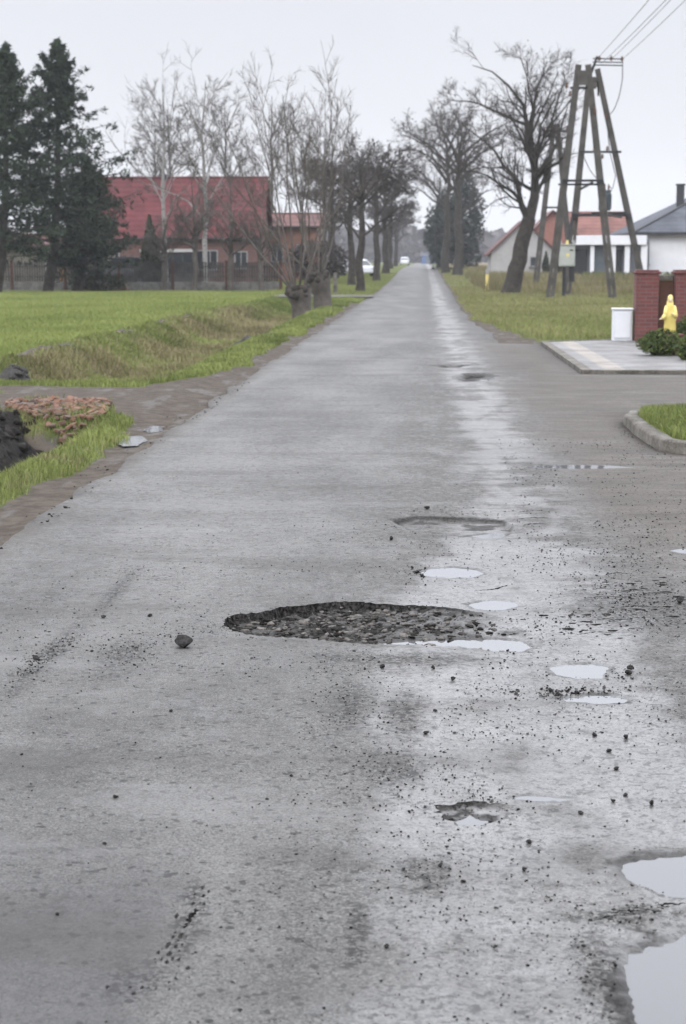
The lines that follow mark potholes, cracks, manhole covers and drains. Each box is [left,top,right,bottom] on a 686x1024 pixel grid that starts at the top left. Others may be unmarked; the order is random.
pothole [451,373,499,381]
pothole [433,801,524,826]
pothole [223,601,545,653]
pothole [387,516,515,539]
pothole [461,598,527,611]
pothole [538,661,618,679]
pothole [413,566,491,579]
